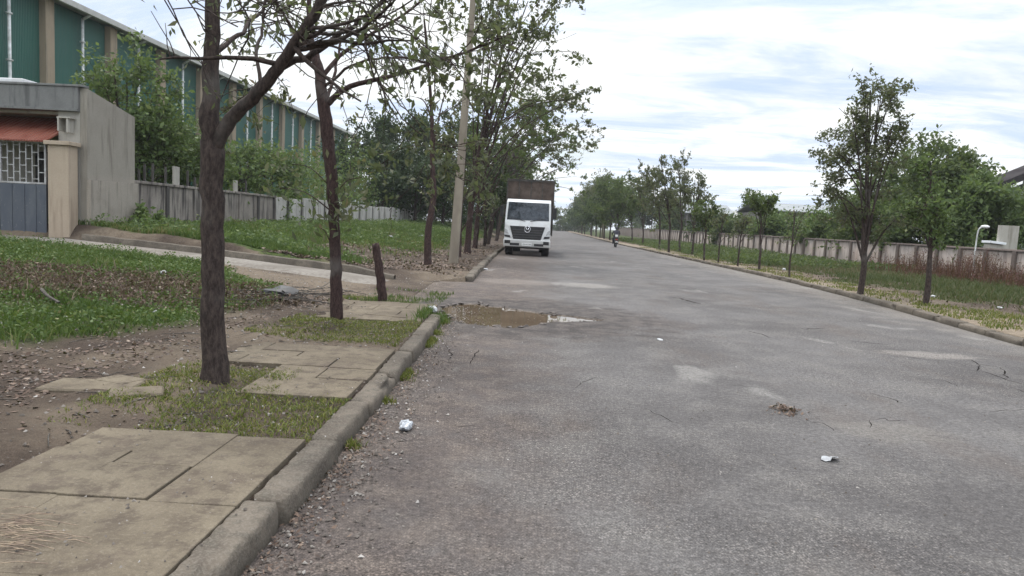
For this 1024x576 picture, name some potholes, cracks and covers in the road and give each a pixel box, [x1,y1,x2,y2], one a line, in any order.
pothole [439,302,606,328]
crack [935,359,1023,392]
